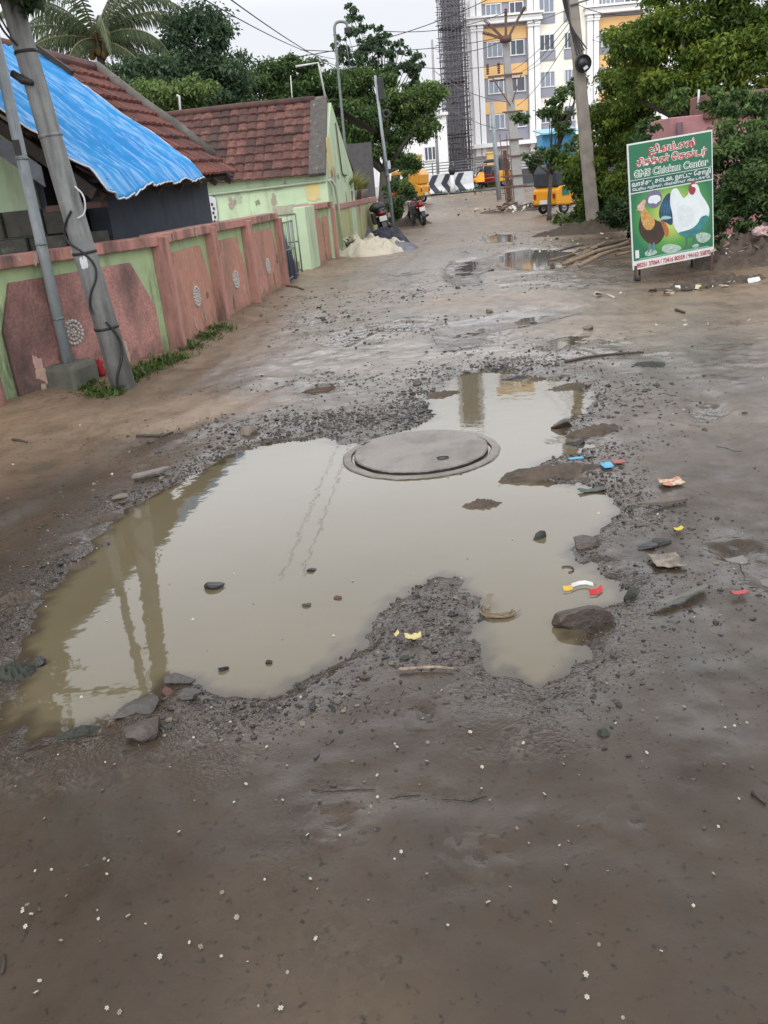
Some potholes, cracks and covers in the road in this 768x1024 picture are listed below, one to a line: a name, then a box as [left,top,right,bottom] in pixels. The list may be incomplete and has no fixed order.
crack [442,796,487,805]
pothole [532,330,602,351]
pothole [444,256,497,287]
pothole [488,247,584,270]
pothole [432,304,588,351]
pothole [0,367,644,758]
manhole cover [343,429,500,480]
pothole [476,232,524,244]
crack [311,788,421,799]
